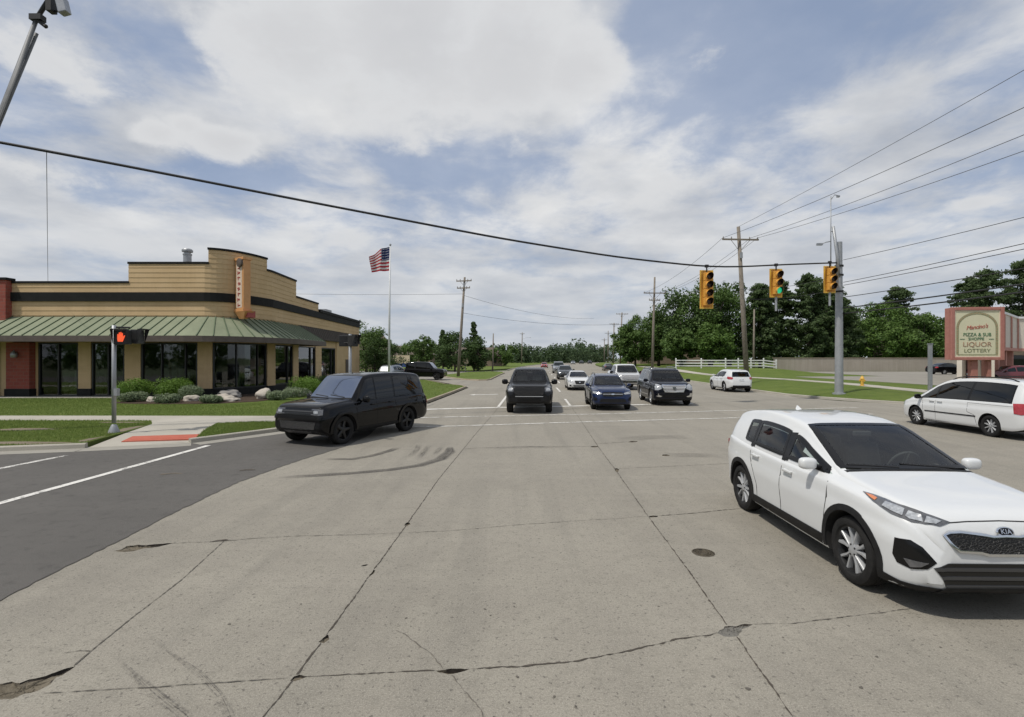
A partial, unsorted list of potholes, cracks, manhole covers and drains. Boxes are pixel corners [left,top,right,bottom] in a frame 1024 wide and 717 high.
pothole [718,624,753,637]
crack [396,630,483,717]
pothole [0,667,74,699]
pothole [116,543,172,552]
manhole cover [692,548,715,557]
